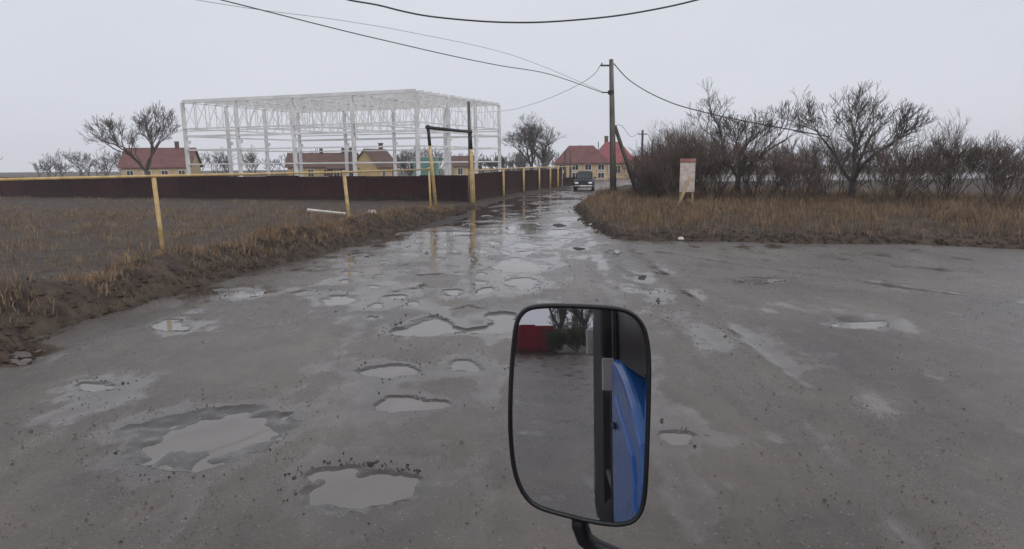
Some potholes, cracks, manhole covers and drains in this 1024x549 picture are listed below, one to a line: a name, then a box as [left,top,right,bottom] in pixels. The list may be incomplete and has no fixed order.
pothole [657,417,709,448]
pothole [317,292,362,305]
pothole [210,287,267,299]
pothole [371,391,465,413]
pothole [502,277,548,290]
pothole [441,288,478,298]
pothole [70,380,124,392]
pothole [149,318,196,332]
pothole [445,357,486,372]
pothole [824,320,891,330]
pothole [278,452,424,524]
pothole [351,359,423,383]
